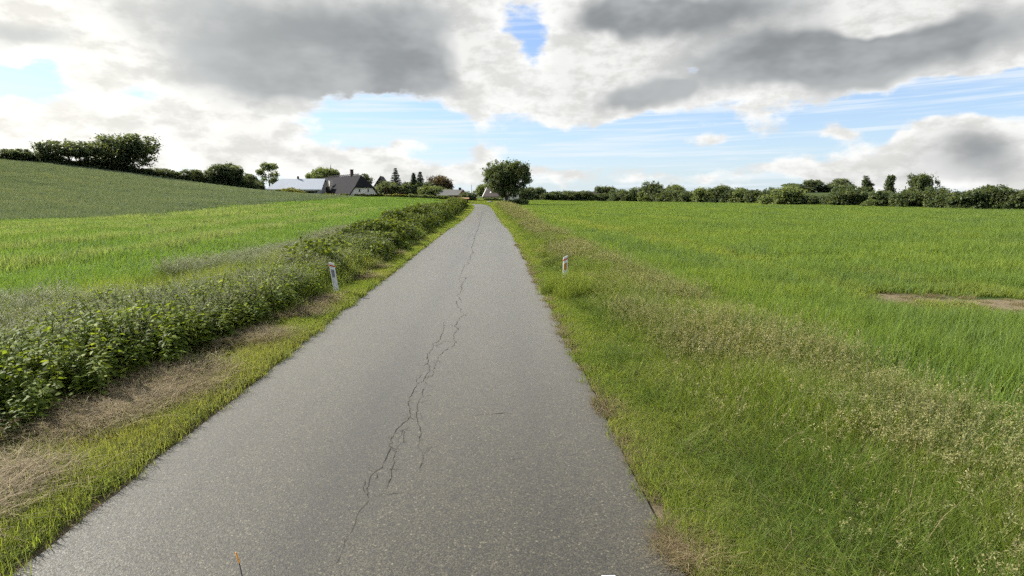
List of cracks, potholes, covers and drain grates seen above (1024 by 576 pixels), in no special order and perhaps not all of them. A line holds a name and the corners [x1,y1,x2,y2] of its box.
crack [338,223,480,560]
